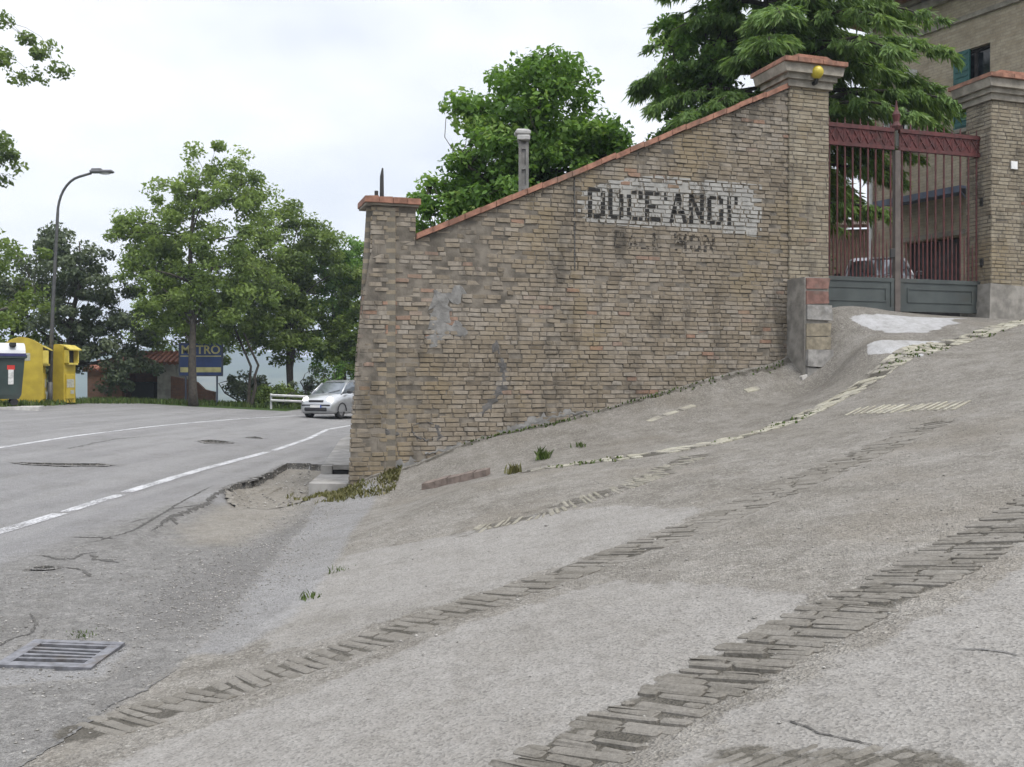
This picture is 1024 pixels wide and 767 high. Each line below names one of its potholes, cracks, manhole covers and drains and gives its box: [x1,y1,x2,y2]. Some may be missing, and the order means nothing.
drain grate [0,639,125,671]
crack [953,647,1024,656]
pothole [219,463,323,509]
crack [0,612,38,645]
crack [782,718,887,747]
crack [37,474,266,577]
